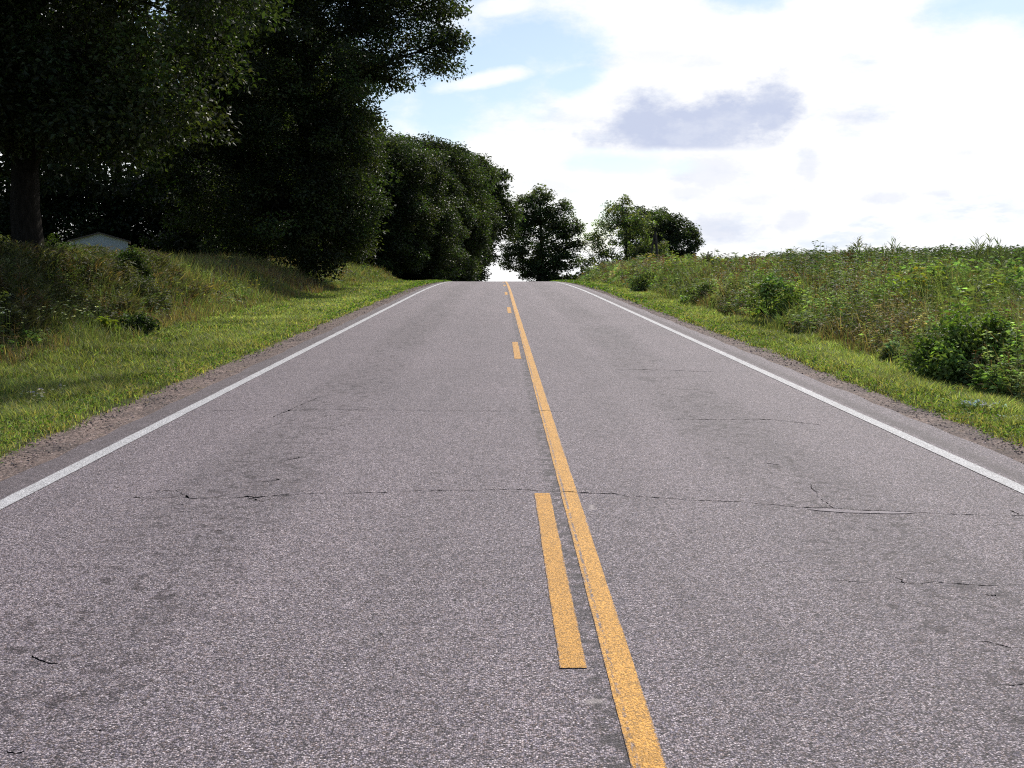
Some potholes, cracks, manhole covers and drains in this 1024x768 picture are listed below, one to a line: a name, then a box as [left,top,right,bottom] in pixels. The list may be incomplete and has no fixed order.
crack [840,577,1000,596]
crack [214,398,562,417]
crack [133,479,1023,516]
